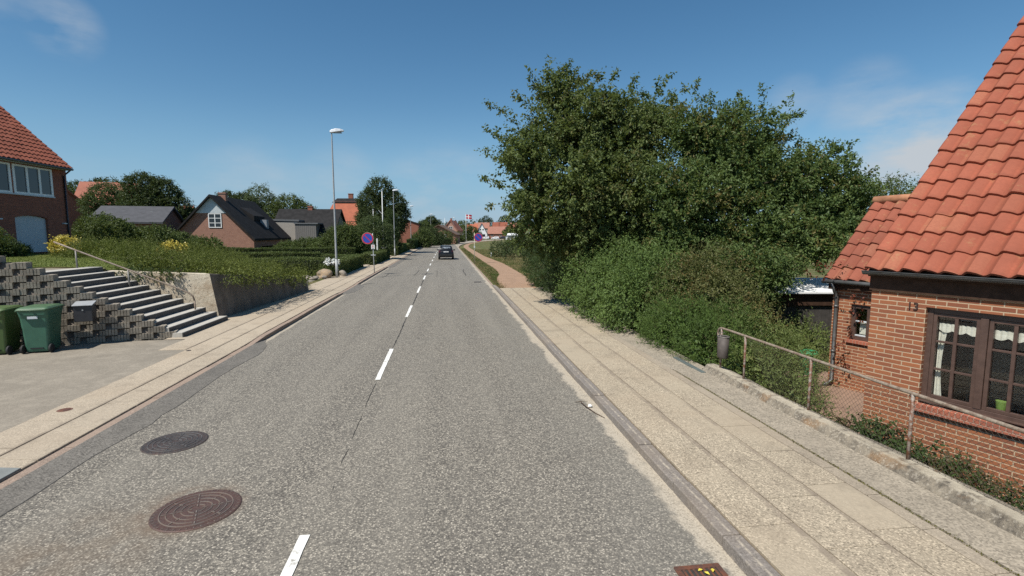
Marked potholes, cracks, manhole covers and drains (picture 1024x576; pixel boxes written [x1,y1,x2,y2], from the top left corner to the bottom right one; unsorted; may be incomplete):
manhole cover [140,431,209,455]
drain grate [674,563,729,576]
manhole cover [148,489,242,533]
